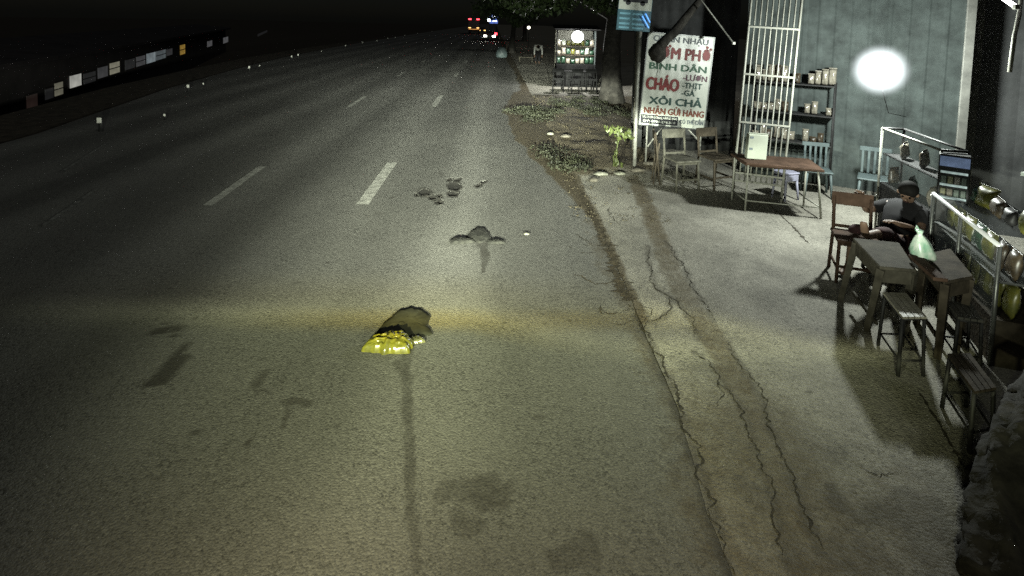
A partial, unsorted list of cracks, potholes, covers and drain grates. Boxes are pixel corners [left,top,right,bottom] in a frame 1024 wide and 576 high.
pothole [415,187,444,205]
pothole [445,177,463,197]
crack [569,189,824,572]
